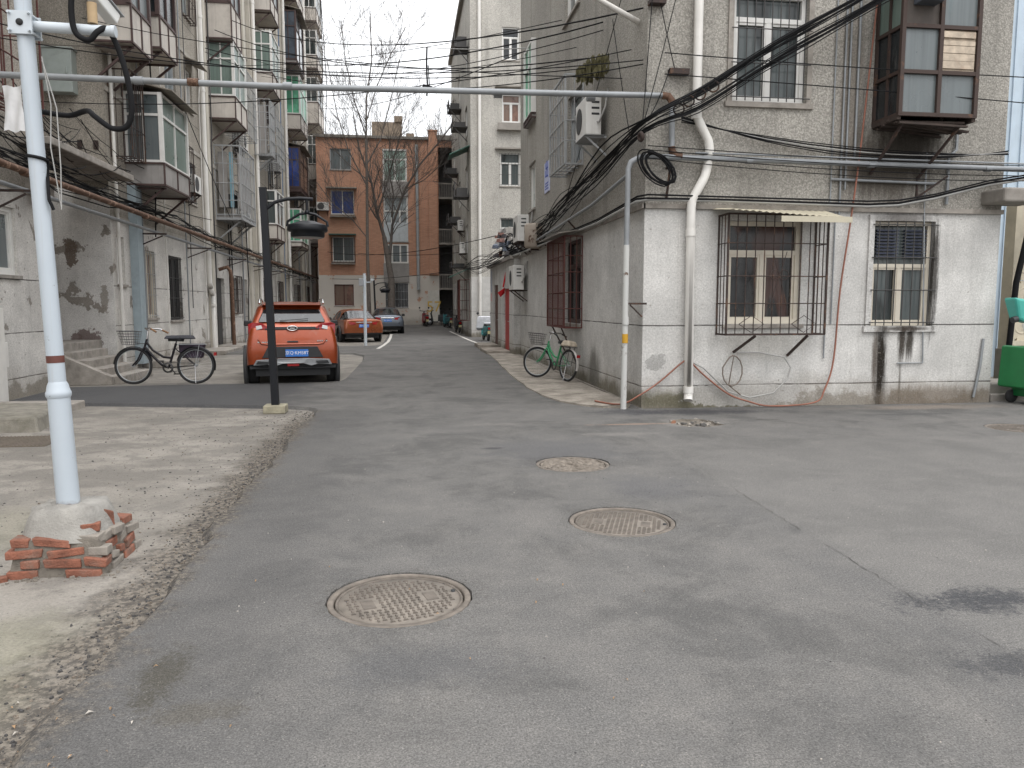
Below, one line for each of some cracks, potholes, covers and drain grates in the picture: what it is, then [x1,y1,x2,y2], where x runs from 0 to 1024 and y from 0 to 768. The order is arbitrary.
manhole cover [569,508,675,537]
manhole cover [984,424,1024,432]
manhole cover [536,457,609,472]
pothole [669,418,724,427]
manhole cover [327,574,471,628]
